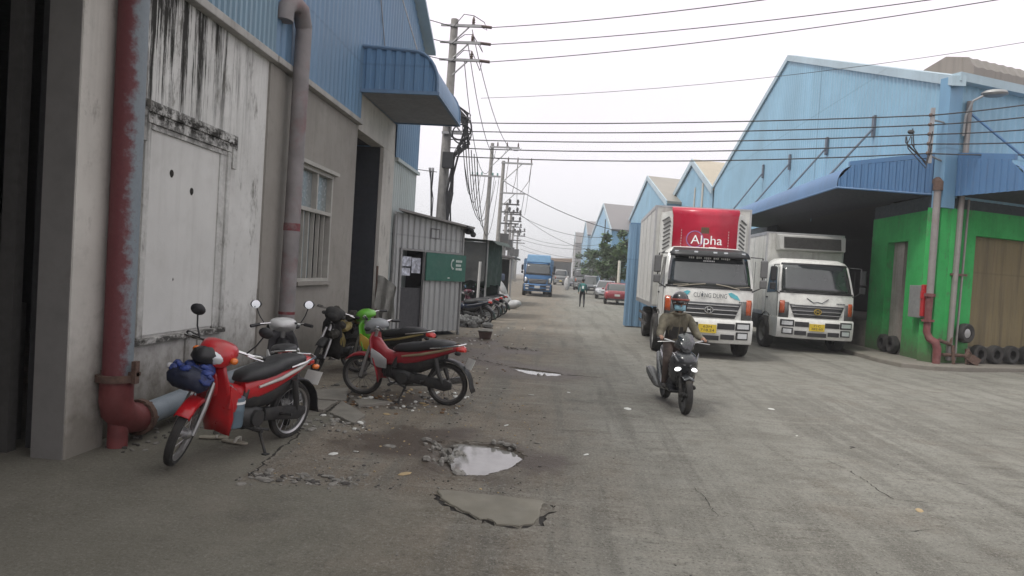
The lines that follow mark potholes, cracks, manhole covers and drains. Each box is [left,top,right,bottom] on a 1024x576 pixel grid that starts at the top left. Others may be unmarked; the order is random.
crack [694,487,719,517]
pothole [504,366,567,377]
pothole [419,436,538,481]
crack [827,460,940,505]
